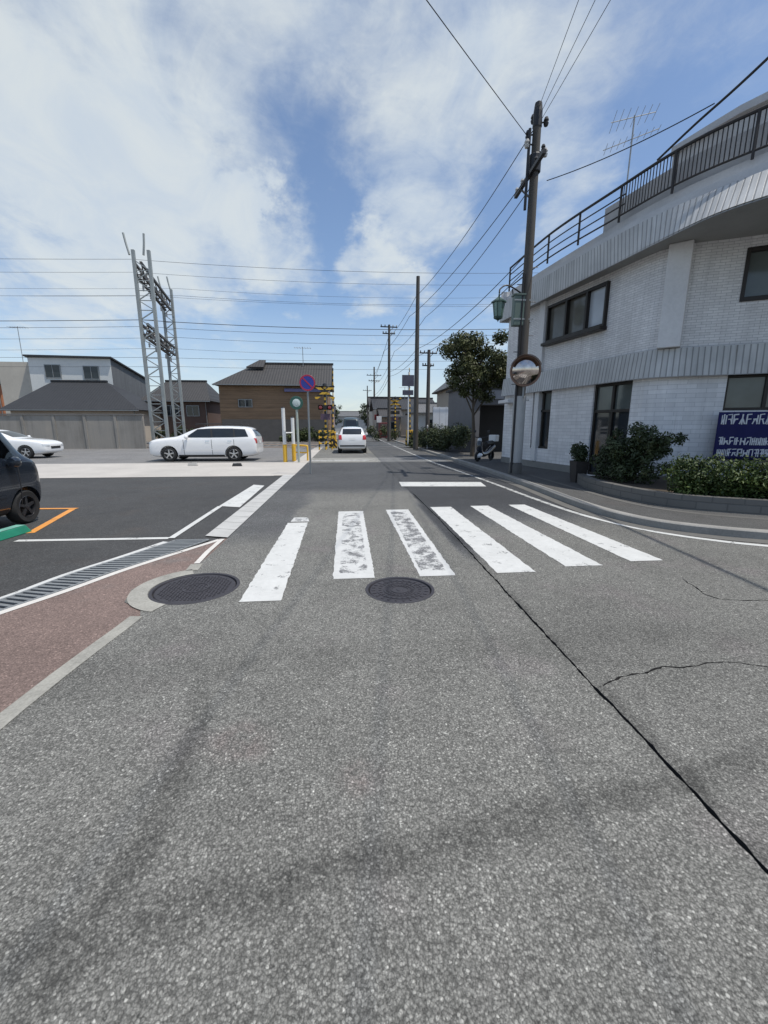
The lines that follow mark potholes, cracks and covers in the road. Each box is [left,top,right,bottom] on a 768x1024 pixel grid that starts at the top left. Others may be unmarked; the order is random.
manhole cover [365,577,435,604]
crack [599,661,768,687]
crack [683,579,760,601]
manhole cover [127,563,203,612]
manhole cover [148,573,240,605]
drain grate [0,539,210,611]
